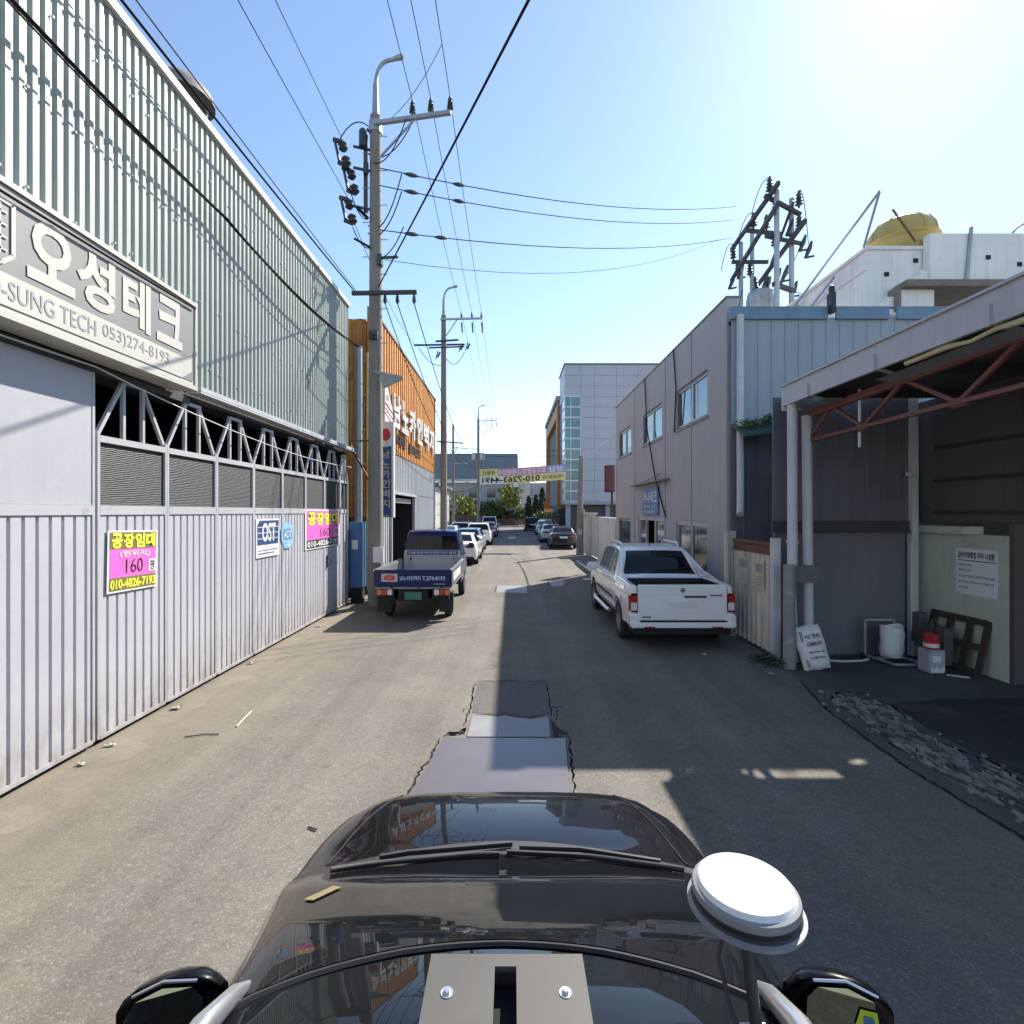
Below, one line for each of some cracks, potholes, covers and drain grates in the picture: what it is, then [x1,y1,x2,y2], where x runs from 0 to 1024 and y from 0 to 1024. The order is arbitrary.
crack [406,680,580,795]
